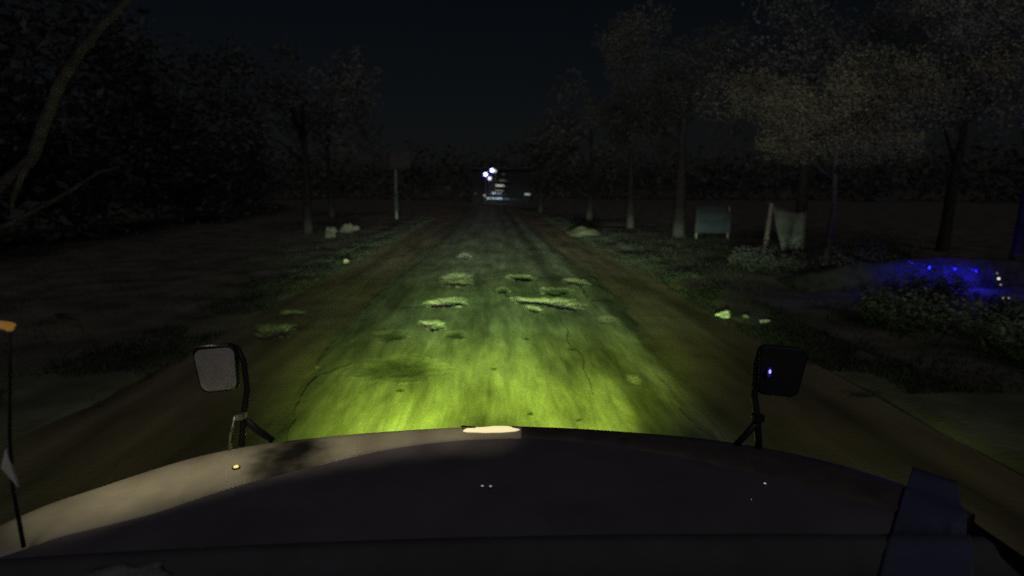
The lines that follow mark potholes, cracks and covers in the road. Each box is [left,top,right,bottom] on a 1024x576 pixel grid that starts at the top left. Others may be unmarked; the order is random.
pothole [421,297,469,308]
crack [559,315,593,395]
pothole [509,297,588,312]
pothole [417,320,447,332]
pothole [624,373,644,388]
pothole [592,316,622,326]
pothole [523,305,545,314]
pothole [437,273,476,287]
pothole [560,278,593,287]
pothole [539,287,574,297]
pothole [506,274,538,282]
